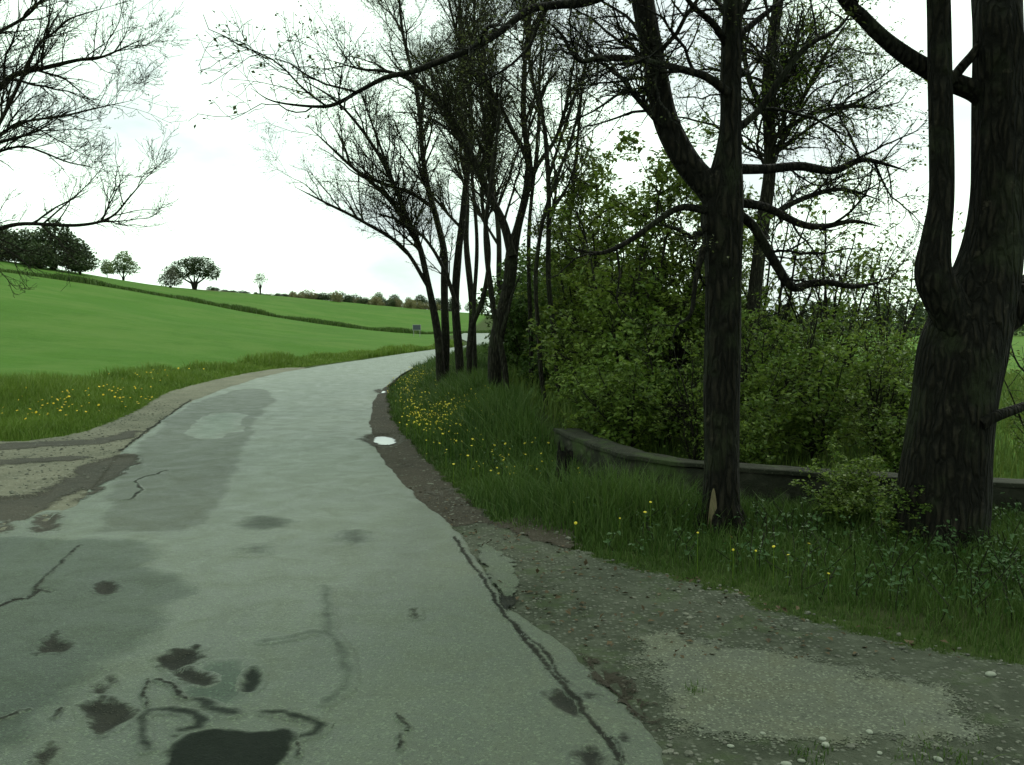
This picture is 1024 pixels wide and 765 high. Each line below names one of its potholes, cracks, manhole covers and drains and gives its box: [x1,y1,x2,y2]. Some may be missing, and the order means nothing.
pothole [162,665,222,688]
crack [137,678,153,709]
crack [451,536,630,765]
crack [0,544,85,608]
pothole [29,629,80,656]
pothole [71,694,144,739]
pothole [235,664,271,694]
crack [120,470,170,501]
pothole [145,644,214,674]
pothole [88,580,125,596]
